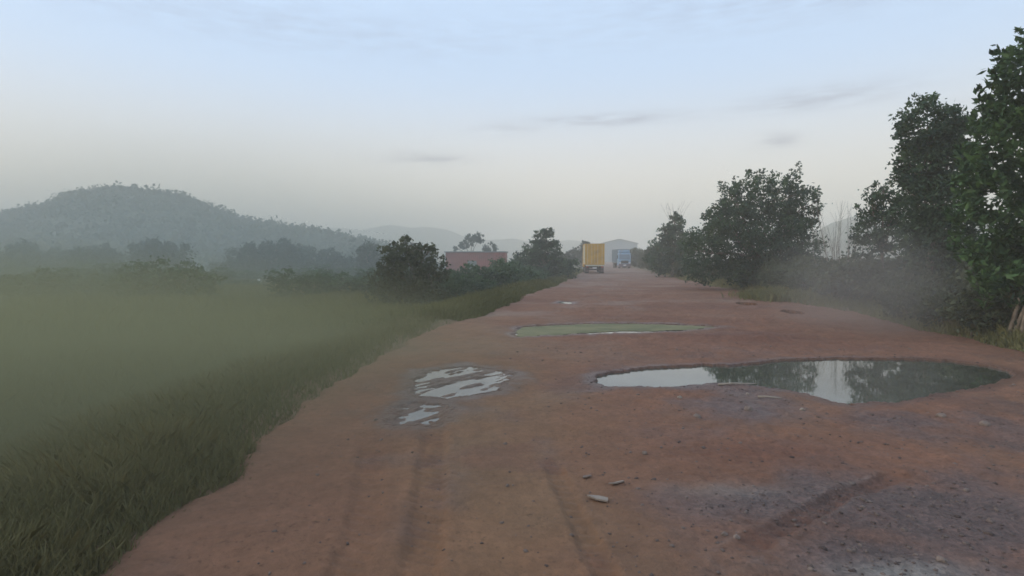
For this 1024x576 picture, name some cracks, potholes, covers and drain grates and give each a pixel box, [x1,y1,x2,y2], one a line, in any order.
pothole [406,365,518,400]
pothole [380,400,455,427]
pothole [591,357,1018,406]
pothole [511,323,725,337]
